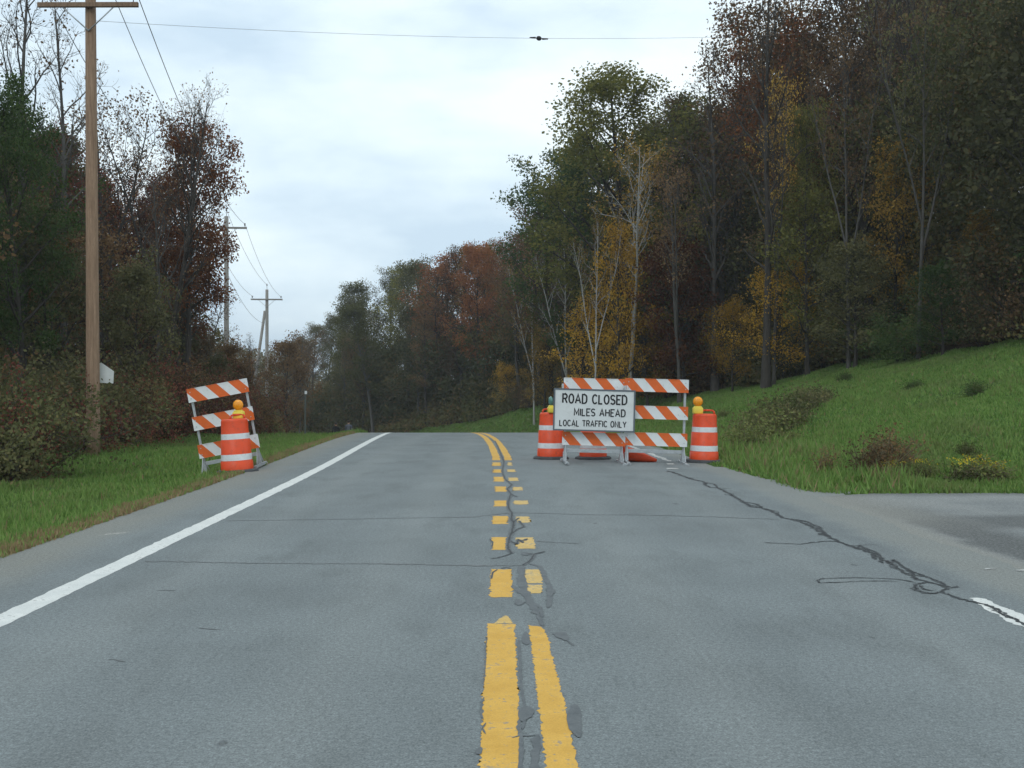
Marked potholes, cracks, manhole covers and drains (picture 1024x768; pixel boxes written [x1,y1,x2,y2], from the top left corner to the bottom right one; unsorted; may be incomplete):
crack [232,471,1024,625]
